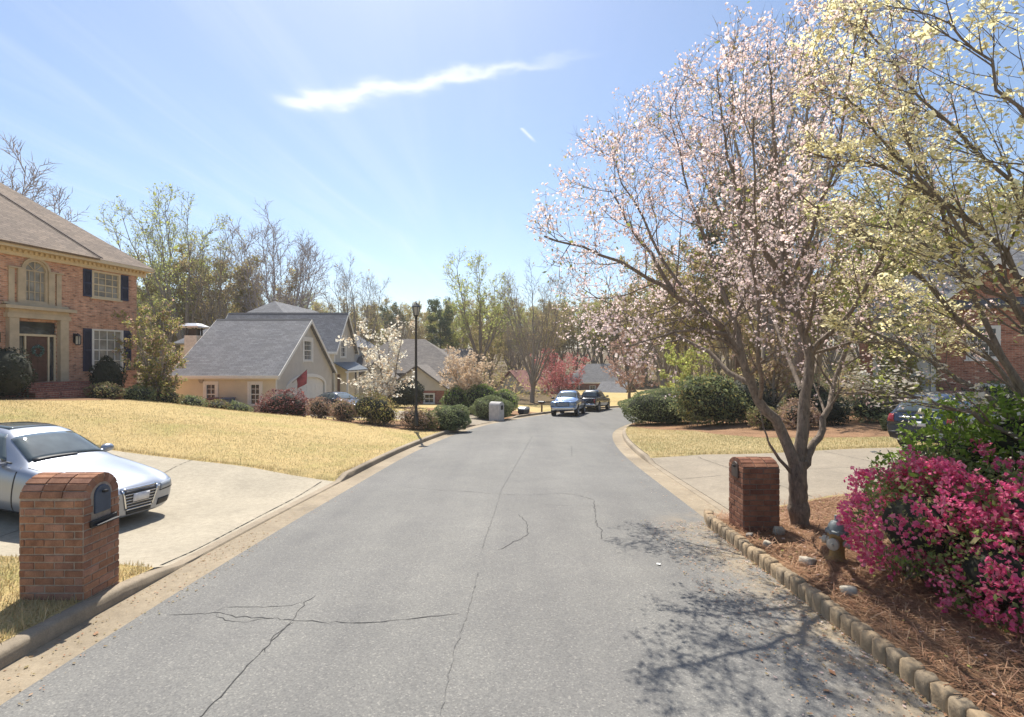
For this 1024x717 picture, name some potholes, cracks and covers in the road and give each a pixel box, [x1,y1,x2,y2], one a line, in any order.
crack [173,595,459,717]
